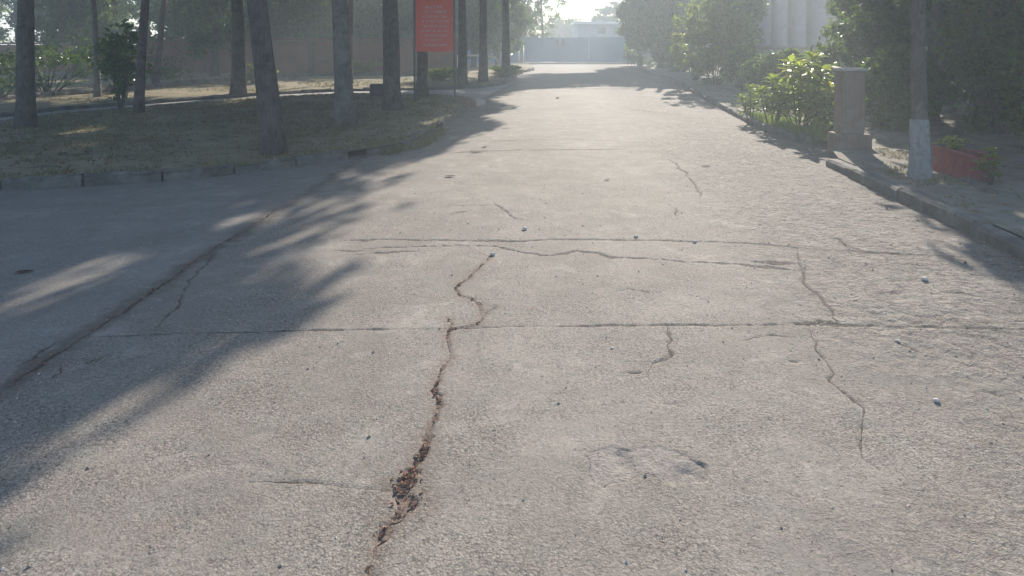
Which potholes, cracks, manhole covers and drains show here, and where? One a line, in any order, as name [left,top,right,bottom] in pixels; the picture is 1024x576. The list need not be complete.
pothole [584,443,706,488]
crack [447,202,528,221]
crack [6,207,1024,576]
